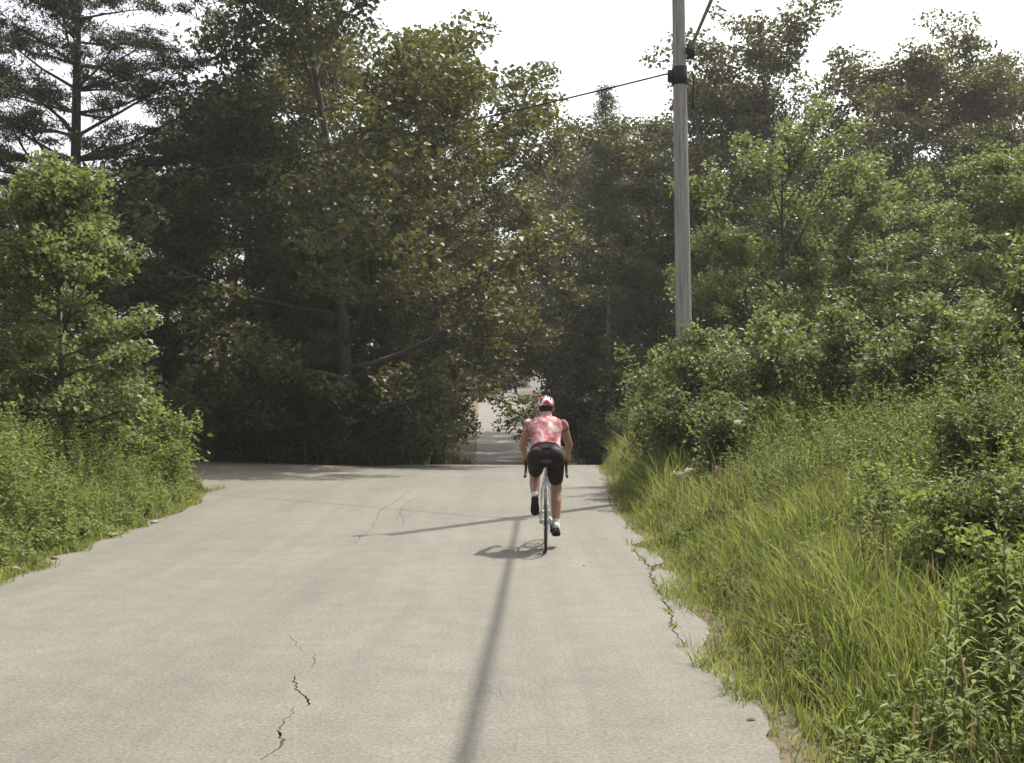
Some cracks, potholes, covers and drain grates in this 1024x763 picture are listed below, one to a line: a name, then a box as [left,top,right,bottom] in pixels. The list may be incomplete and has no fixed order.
crack [634,546,684,649]
crack [261,636,316,760]
